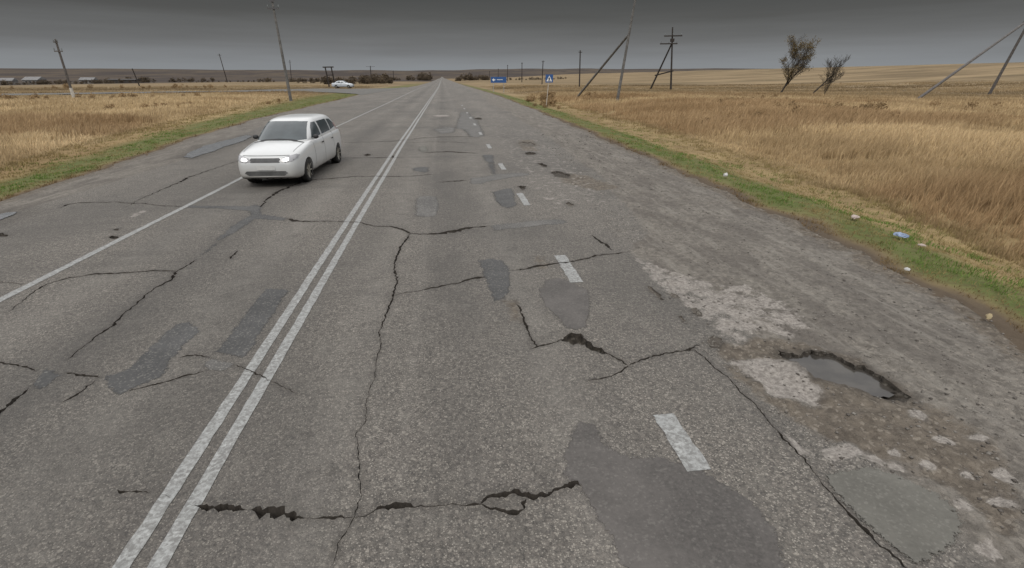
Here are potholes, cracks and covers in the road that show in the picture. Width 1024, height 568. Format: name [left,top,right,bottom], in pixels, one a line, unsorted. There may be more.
crack [0,260,195,414]
crack [118,219,623,561]
crack [260,174,466,207]
crack [515,302,906,568]
pothole [778,350,911,403]
